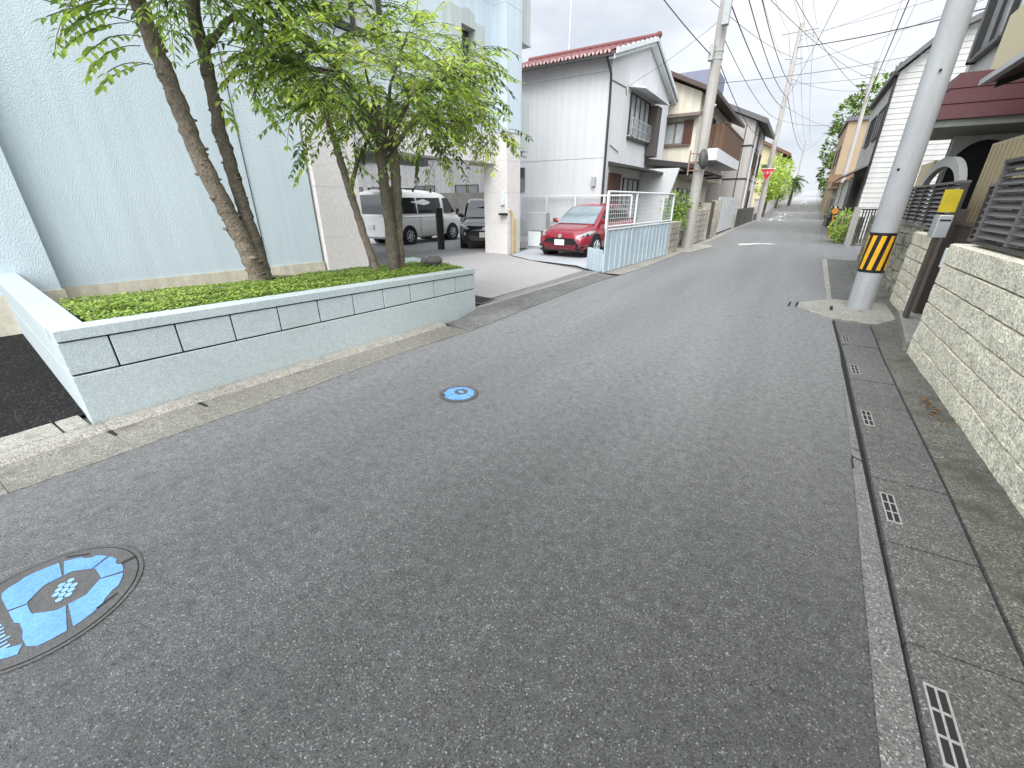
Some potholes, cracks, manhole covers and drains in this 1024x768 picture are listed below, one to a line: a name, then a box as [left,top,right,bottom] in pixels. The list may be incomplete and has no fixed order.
manhole cover [439,386,479,402]
manhole cover [0,545,143,674]
